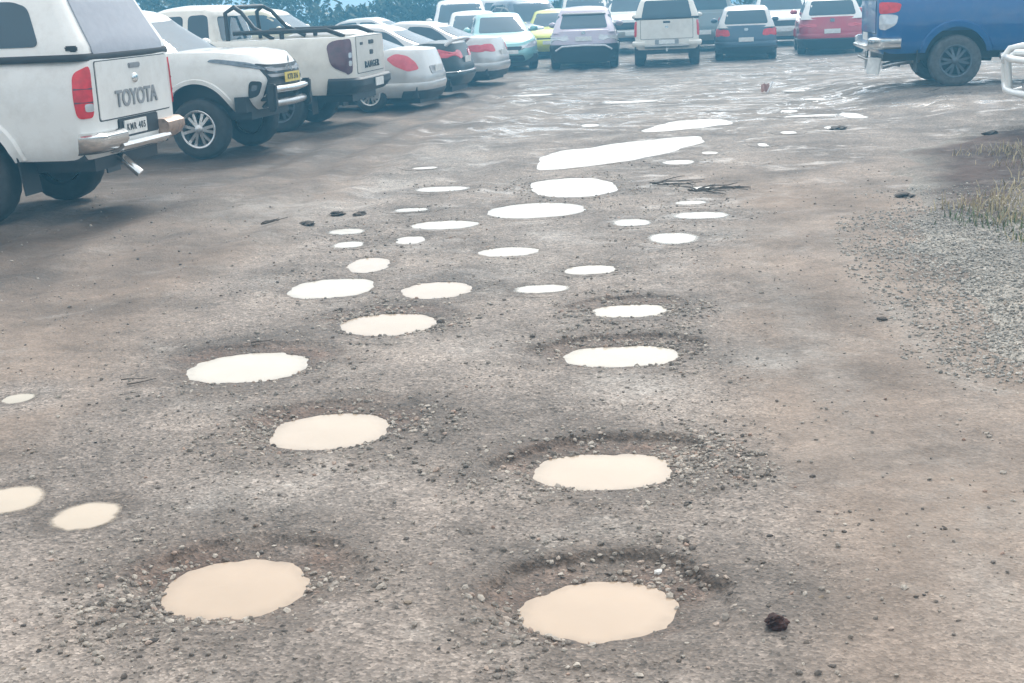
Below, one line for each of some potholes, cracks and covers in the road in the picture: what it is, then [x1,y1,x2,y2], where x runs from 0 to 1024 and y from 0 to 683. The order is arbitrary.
pothole [0,473,81,525]
pothole [455,241,561,260]
pothole [513,174,637,199]
pothole [135,337,358,394]
pothole [620,228,725,249]
pothole [513,328,731,375]
pothole [466,198,608,221]
pothole [325,253,413,277]
pothole [207,391,447,464]
pothole [467,427,738,506]
pothole [14,487,154,544]
pothole [543,259,636,277]
